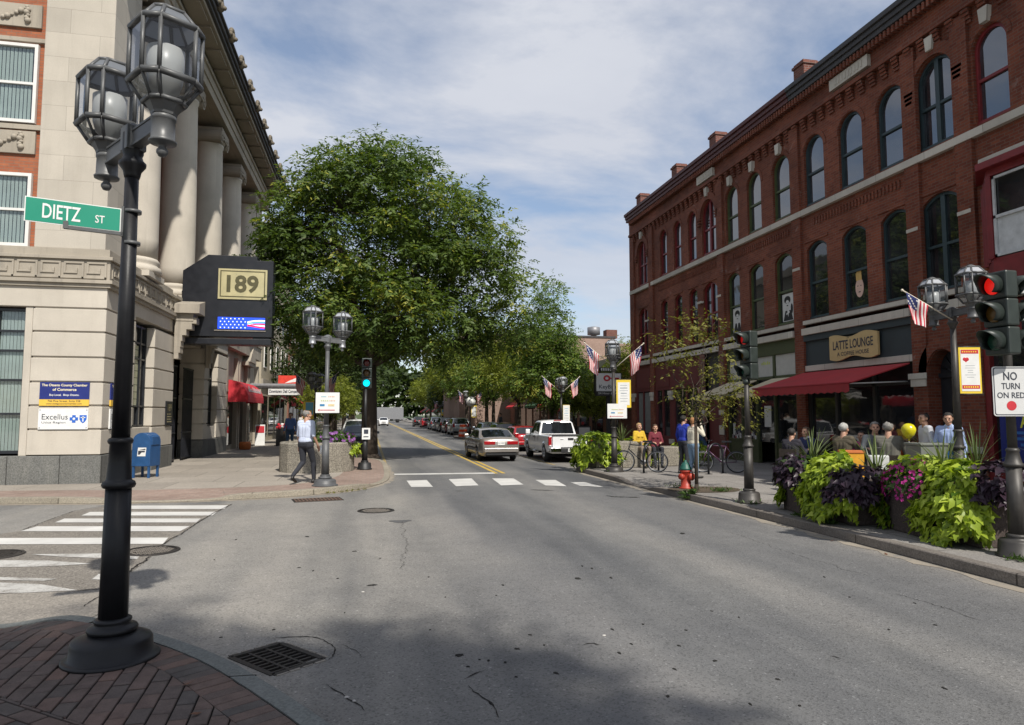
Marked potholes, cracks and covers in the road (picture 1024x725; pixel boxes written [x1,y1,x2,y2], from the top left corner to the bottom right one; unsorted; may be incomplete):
crack [270,636,361,659]
manhole cover [0,549,26,559]
drain grate [228,642,328,676]
manhole cover [130,545,181,556]
